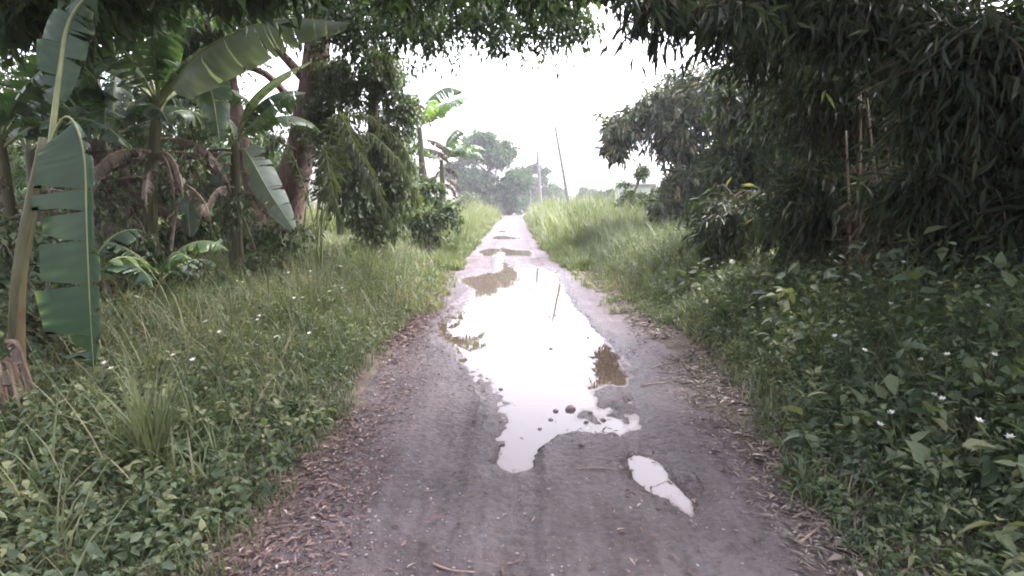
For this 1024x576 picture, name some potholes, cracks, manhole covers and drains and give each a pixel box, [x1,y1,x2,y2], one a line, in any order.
pothole [616,451,707,519]
